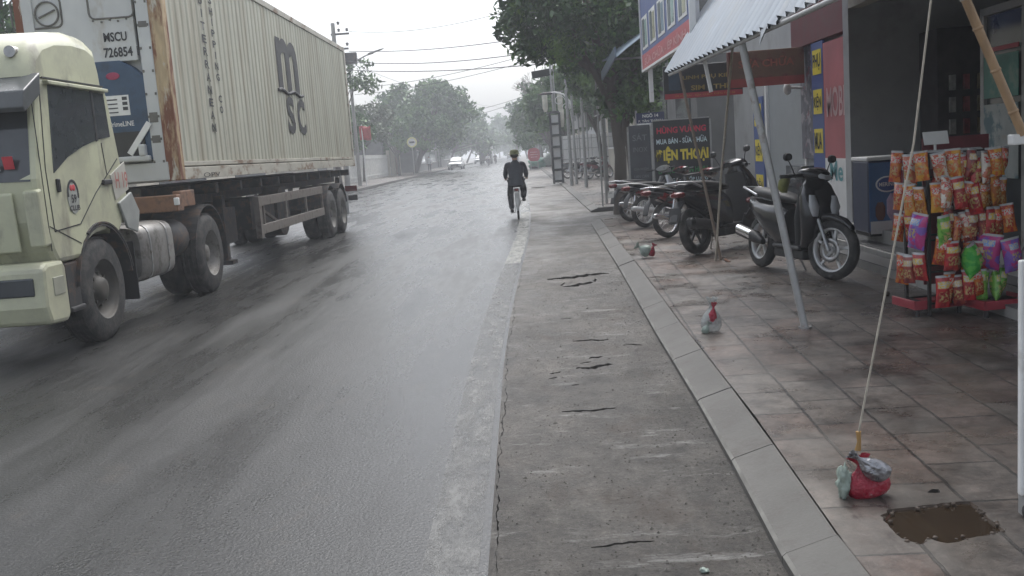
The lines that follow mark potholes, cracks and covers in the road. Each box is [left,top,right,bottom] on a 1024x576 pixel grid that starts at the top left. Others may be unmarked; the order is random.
crack [495,263,525,576]
crack [547,273,609,287]
pothole [880,501,1006,544]
crack [549,339,612,386]
